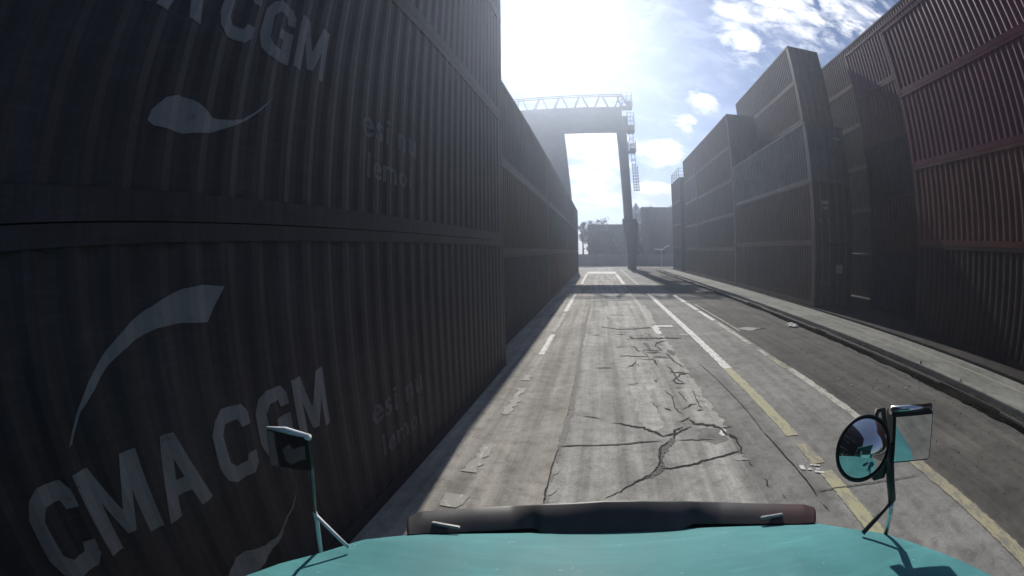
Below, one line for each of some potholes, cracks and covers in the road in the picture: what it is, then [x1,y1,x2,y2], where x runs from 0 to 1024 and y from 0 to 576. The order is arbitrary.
crack [603,327,830,511]
